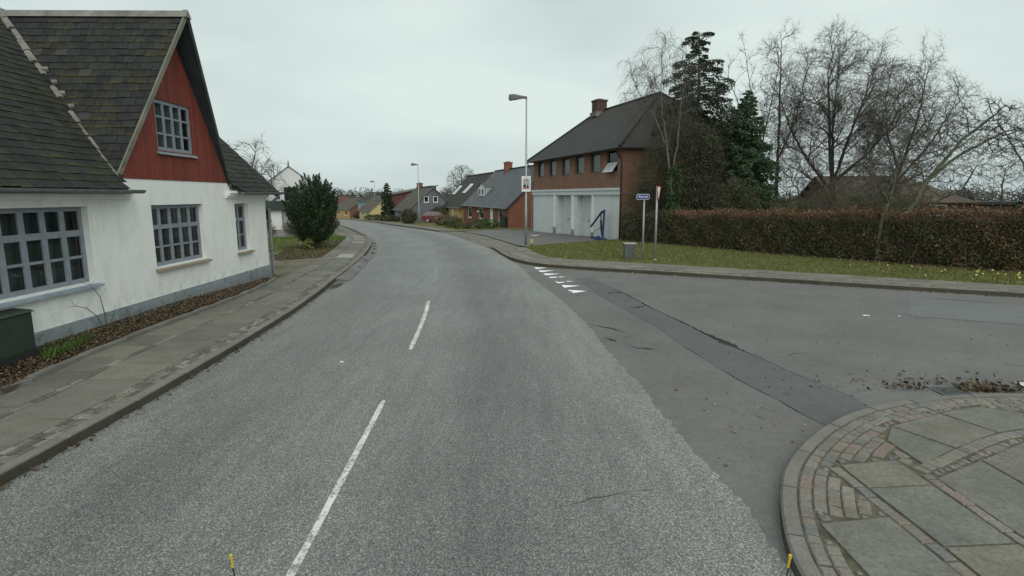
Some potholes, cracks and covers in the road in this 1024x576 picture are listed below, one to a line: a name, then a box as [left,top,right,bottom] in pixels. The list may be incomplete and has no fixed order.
crack [577,282,848,422]
drain grate [926,386,975,396]
crack [558,489,656,507]
